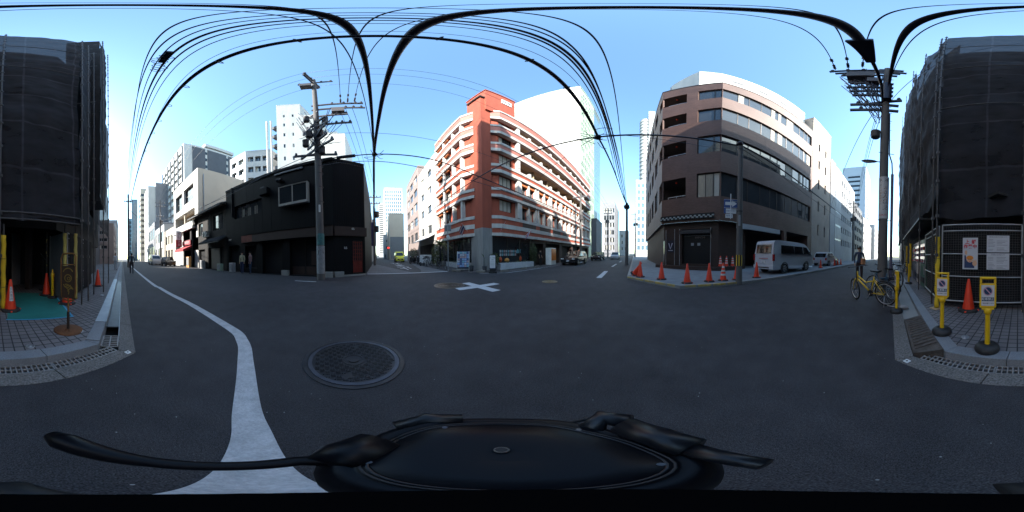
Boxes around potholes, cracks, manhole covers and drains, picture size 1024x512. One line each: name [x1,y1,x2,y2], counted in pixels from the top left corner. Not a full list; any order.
manhole cover [303,340,404,389]
drain grate [0,362,1024,375]
drain grate [100,335,119,347]
drain grate [920,355,996,374]
drain grate [51,346,117,369]
